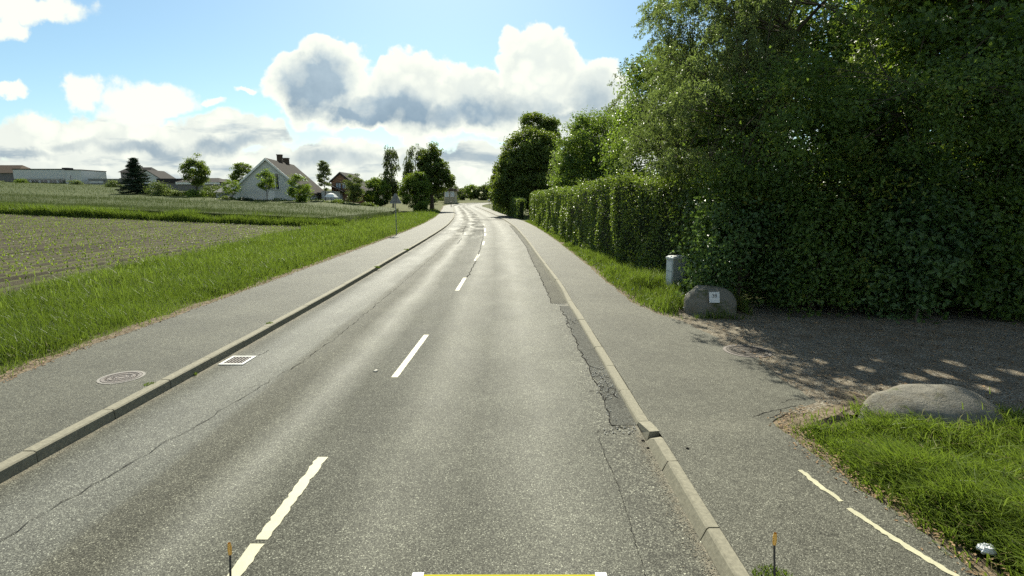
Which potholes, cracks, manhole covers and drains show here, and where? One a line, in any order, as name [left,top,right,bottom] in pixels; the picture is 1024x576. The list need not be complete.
manhole cover [96,371,146,384]
crack [556,303,646,576]
drain grate [218,356,257,365]
manhole cover [723,345,772,358]
